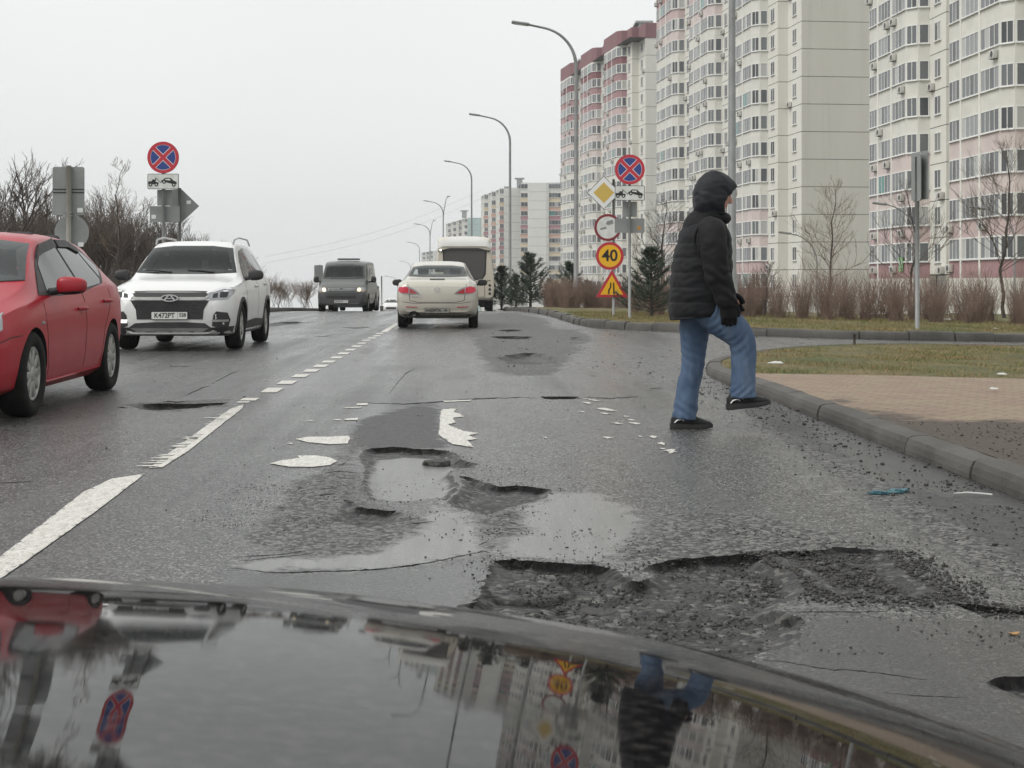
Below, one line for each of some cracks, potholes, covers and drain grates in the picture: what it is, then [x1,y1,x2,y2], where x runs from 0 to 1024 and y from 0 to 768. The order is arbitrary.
pothole [358,447,478,502]
pothole [767,547,935,598]
pothole [985,676,1024,699]
crack [118,372,235,408]
pothole [494,353,559,365]
crack [232,522,520,573]
pothole [447,476,552,515]
crack [764,660,966,698]
crack [360,370,630,405]
